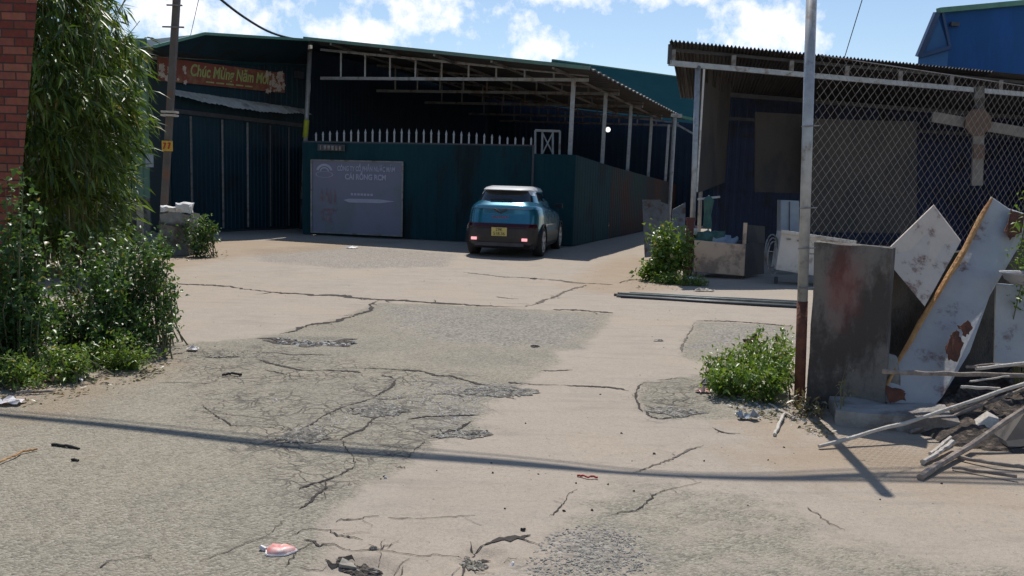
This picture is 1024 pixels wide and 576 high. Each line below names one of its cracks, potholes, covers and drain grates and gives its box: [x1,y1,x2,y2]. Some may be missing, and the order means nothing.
pothole [434,430,493,439]
crack [197,352,555,576]
crack [608,378,740,516]
pothole [260,337,356,347]
pothole [465,385,540,397]
crack [173,272,637,334]
